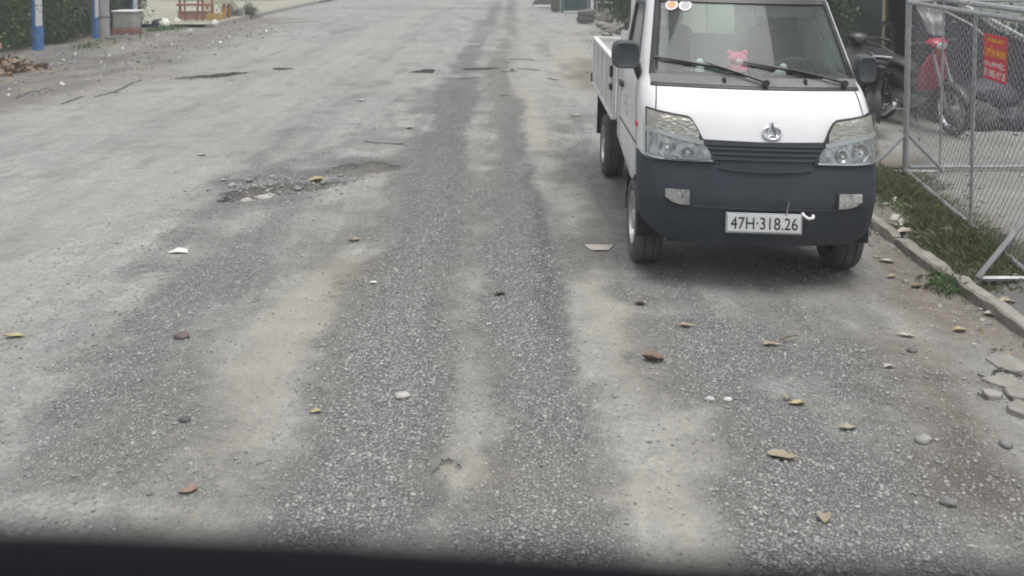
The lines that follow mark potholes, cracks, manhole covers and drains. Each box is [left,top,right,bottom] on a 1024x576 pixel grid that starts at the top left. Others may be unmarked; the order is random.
crack [16,80,142,104]
pothole [173,177,392,210]
